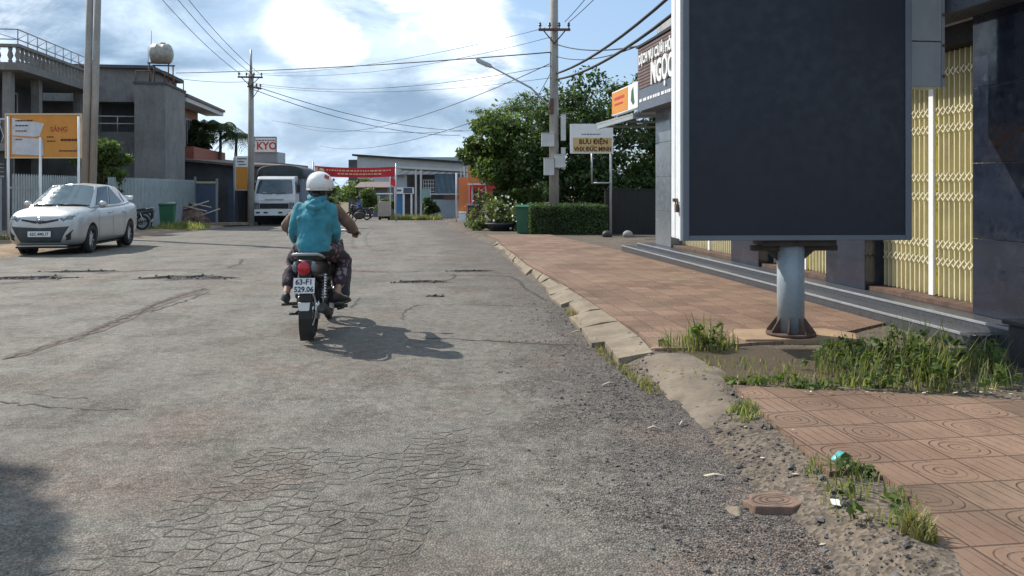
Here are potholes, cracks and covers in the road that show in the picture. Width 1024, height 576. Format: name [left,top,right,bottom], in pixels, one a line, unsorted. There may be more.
crack [2,259,262,359]
crack [352,270,547,301]
crack [34,428,487,576]
